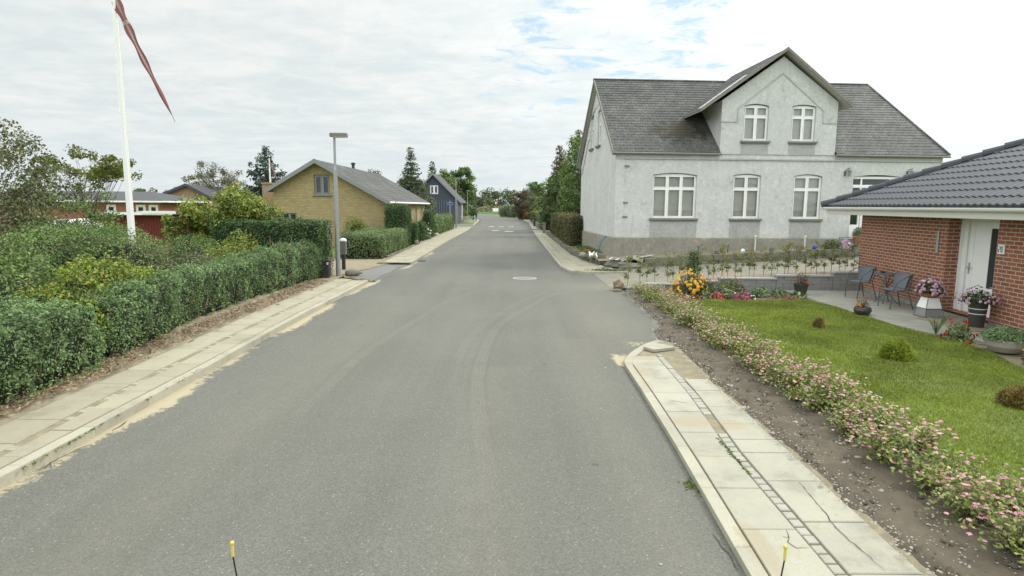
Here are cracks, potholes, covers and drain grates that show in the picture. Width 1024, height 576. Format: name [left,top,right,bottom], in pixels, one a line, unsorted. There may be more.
crack [800,483,880,566]
